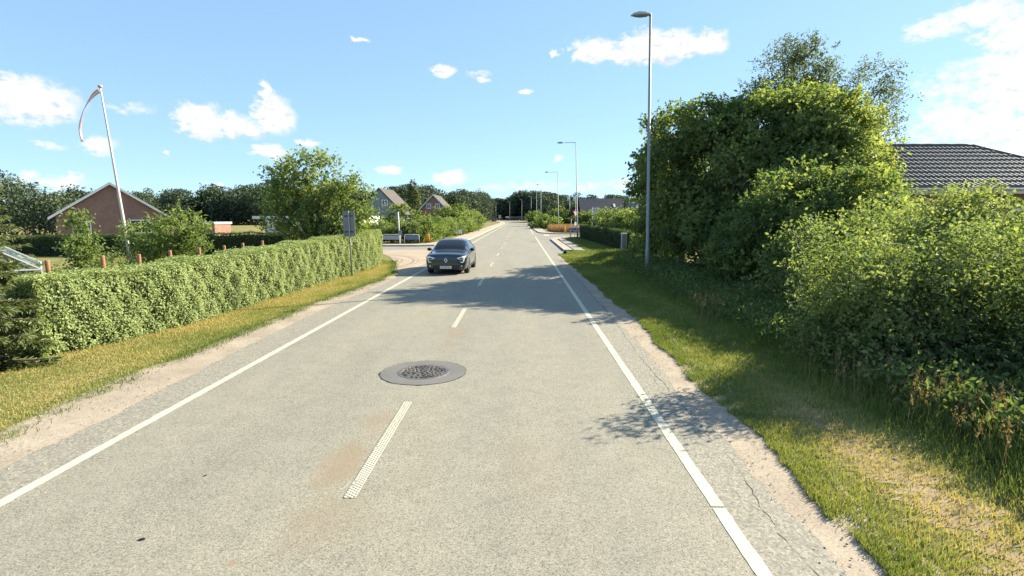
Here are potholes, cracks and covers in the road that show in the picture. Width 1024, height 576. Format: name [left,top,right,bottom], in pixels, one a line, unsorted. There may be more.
manhole cover [397,365,449,380]
